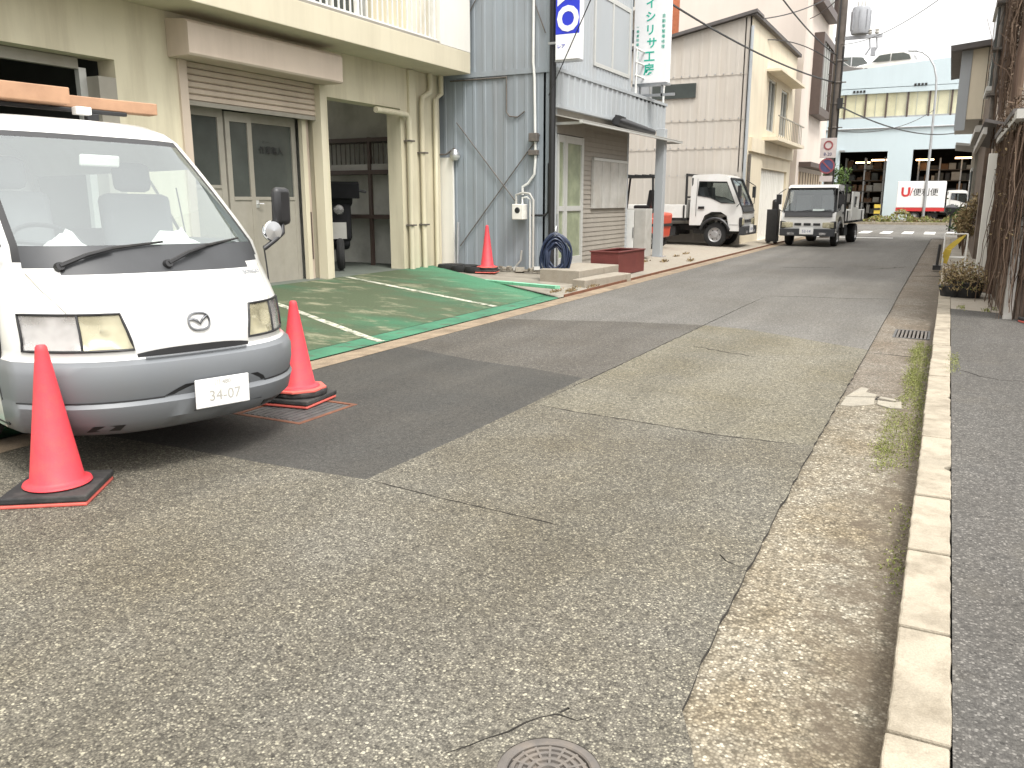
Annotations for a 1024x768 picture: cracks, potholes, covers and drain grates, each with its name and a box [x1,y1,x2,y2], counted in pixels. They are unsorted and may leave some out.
drain grate [892,329,931,340]
manhole cover [496,738,601,768]
crack [446,707,598,753]
